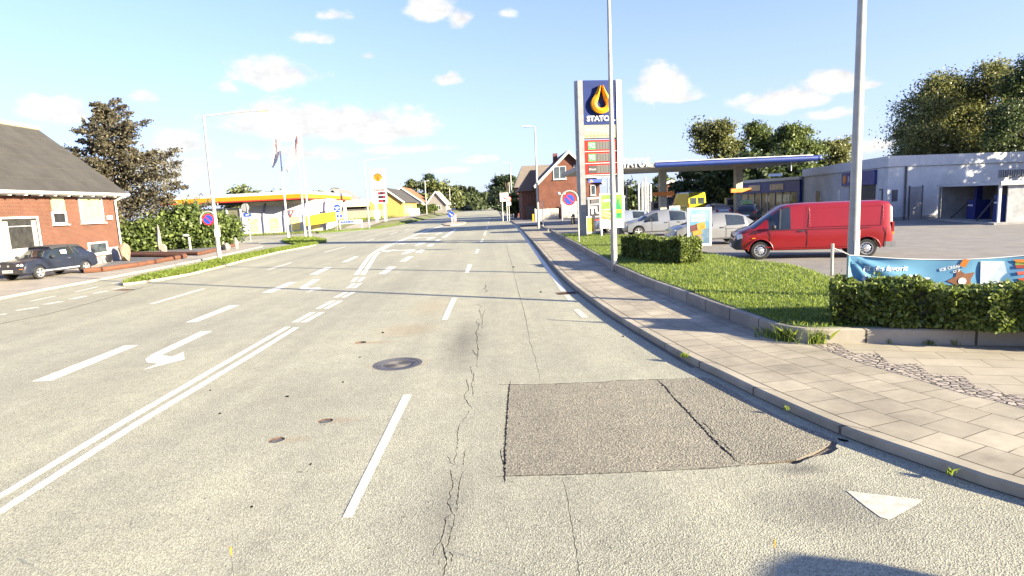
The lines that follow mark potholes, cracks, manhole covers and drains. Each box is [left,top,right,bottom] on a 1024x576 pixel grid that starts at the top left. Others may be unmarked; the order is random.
crack [433,304,484,576]
manhole cover [372,357,422,371]
